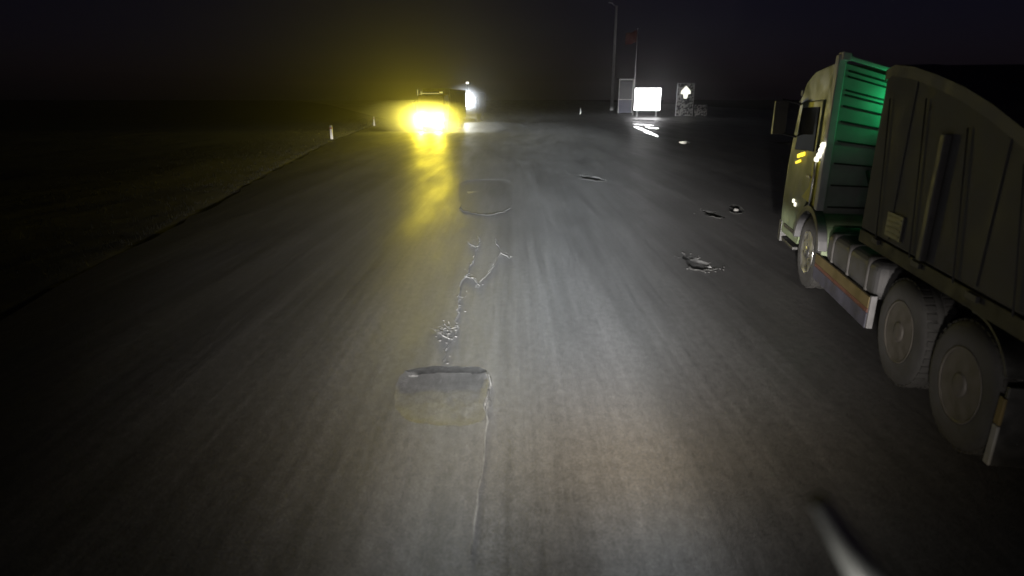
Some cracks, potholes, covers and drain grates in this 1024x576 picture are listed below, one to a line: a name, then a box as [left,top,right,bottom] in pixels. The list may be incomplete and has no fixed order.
pothole [679,252,724,273]
pothole [394,366,491,426]
pothole [458,179,514,215]
crack [434,234,517,364]
pothole [728,205,744,214]
crack [471,373,492,555]
